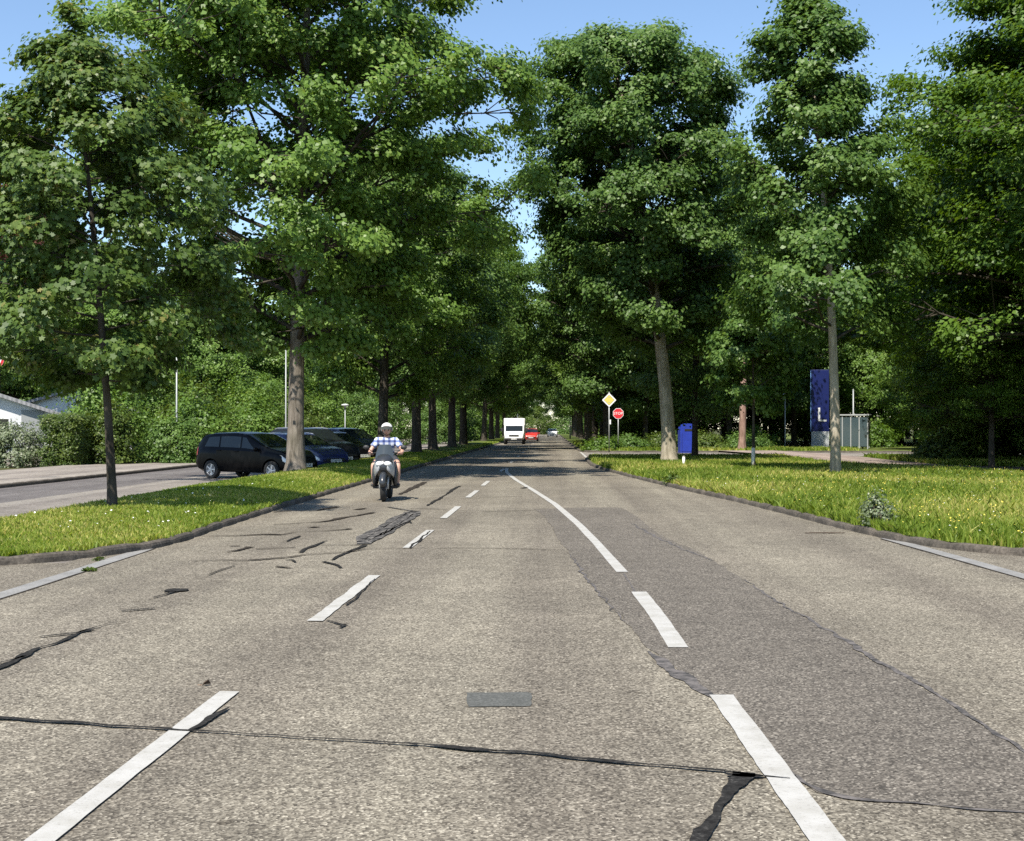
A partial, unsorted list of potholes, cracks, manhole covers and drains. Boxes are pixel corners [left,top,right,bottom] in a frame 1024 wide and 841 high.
crack [0,707,790,841]
crack [193,482,556,627]
crack [0,588,188,668]
